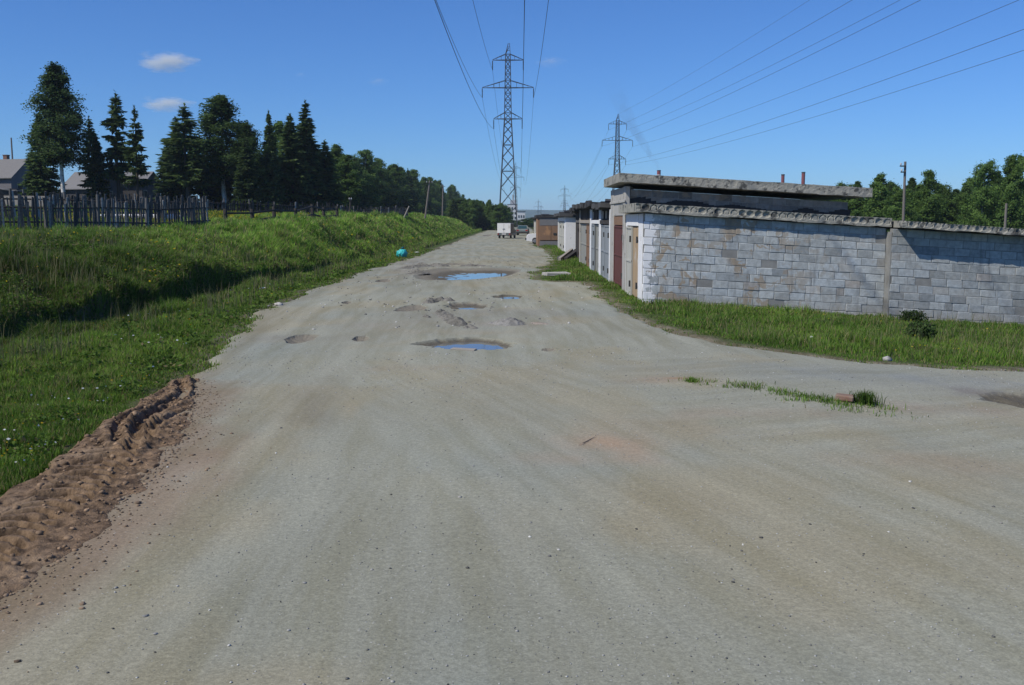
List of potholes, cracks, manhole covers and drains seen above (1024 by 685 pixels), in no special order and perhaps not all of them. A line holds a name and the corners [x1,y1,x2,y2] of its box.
pothole [976,392,1024,408]
pothole [413,267,522,280]
pothole [445,301,491,309]
pothole [284,334,320,344]
pothole [410,337,519,349]
